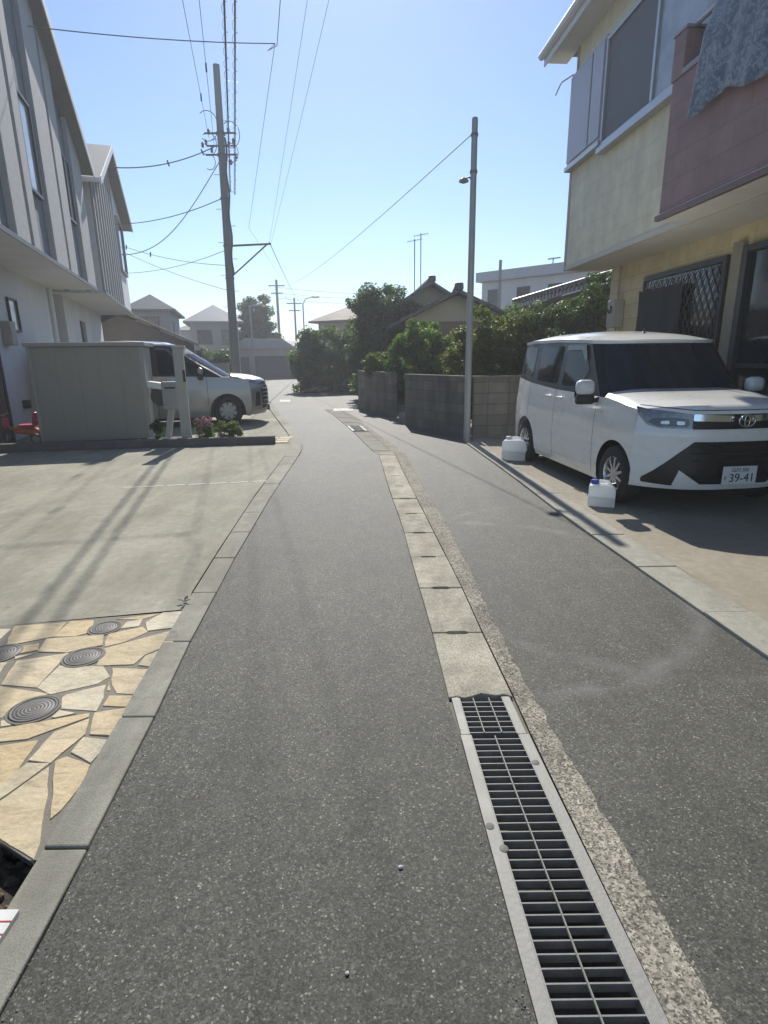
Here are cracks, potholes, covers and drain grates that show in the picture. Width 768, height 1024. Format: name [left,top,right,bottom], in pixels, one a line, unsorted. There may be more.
manhole cover [87,620,123,635]
manhole cover [61,647,106,668]
drain grate [451,696,527,739]
manhole cover [4,695,62,725]
manhole cover [0,644,24,662]
drain grate [461,734,670,1024]
